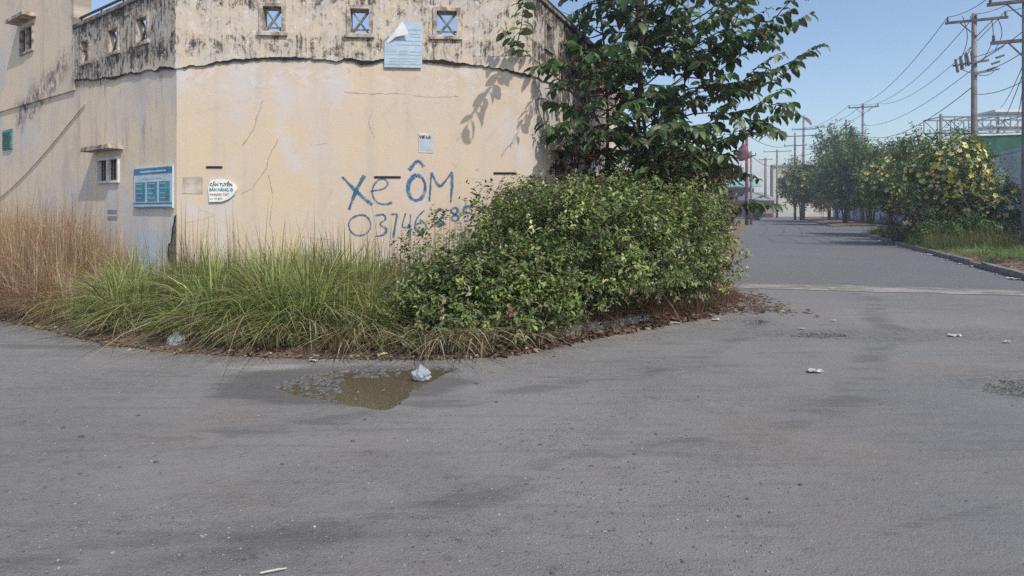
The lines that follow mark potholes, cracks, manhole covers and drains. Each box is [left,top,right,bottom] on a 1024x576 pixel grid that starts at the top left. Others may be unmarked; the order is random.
pothole [981,380,1024,398]
pothole [272,367,459,404]
